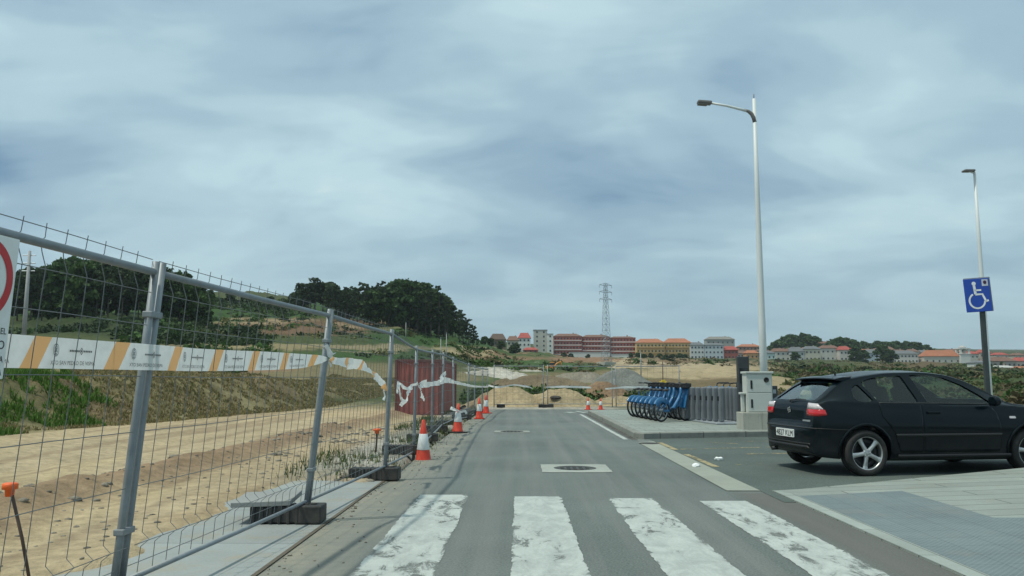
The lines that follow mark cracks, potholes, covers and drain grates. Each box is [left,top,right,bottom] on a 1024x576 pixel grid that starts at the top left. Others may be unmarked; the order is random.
manhole cover [540,464,612,472]
